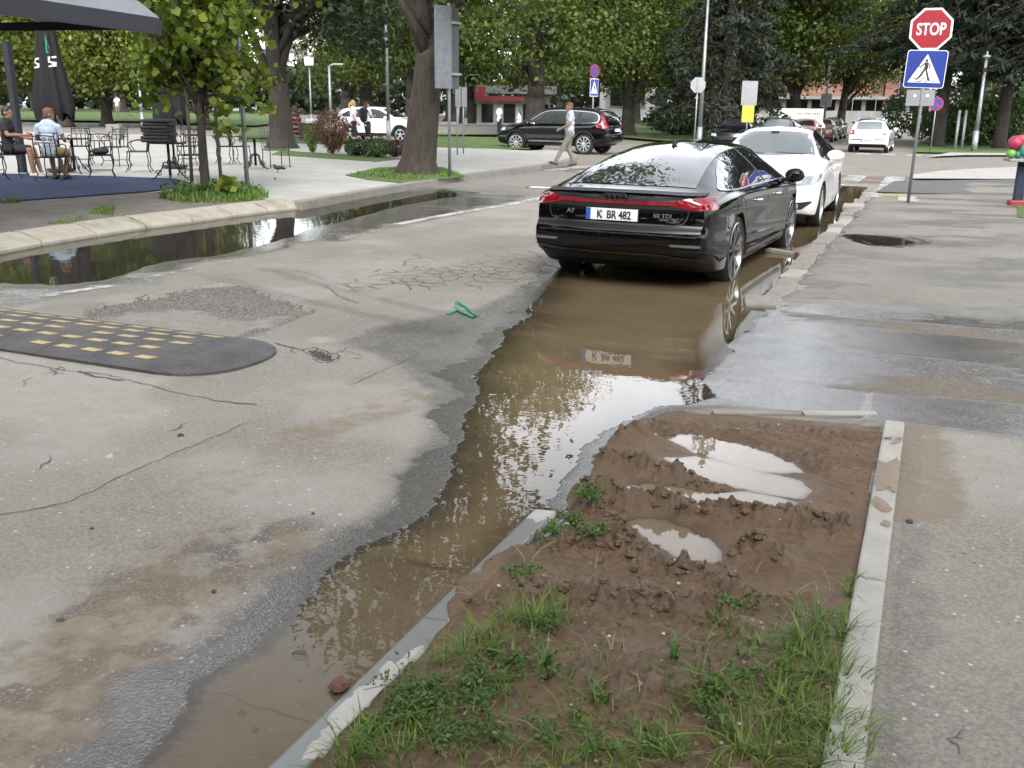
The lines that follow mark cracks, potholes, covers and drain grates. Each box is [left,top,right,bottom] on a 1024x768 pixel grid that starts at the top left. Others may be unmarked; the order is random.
crack [1,357,258,405]
crack [274,342,407,383]
crack [947,729,965,754]
crack [324,246,560,303]
pothole [843,234,924,246]
